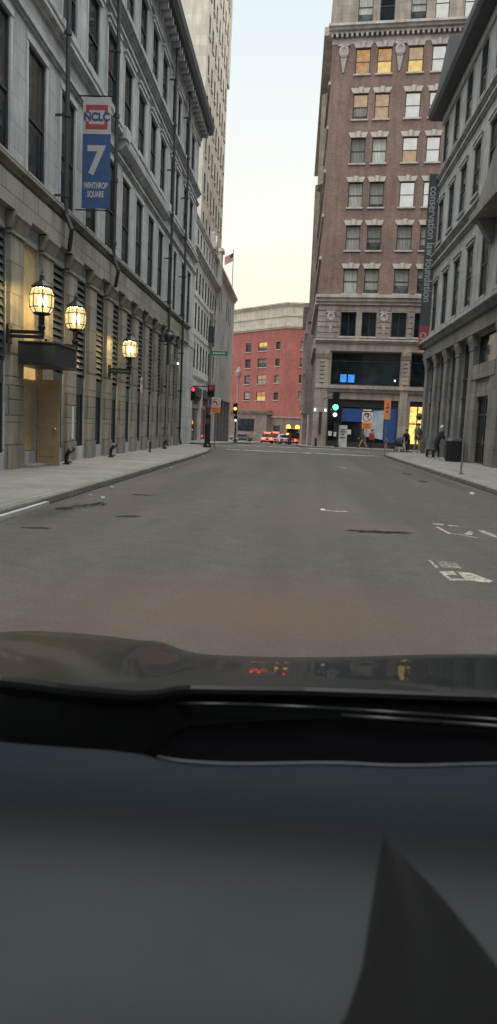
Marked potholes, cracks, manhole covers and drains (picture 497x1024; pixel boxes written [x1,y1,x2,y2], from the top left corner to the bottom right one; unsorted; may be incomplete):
pothole [53,502,107,511]
